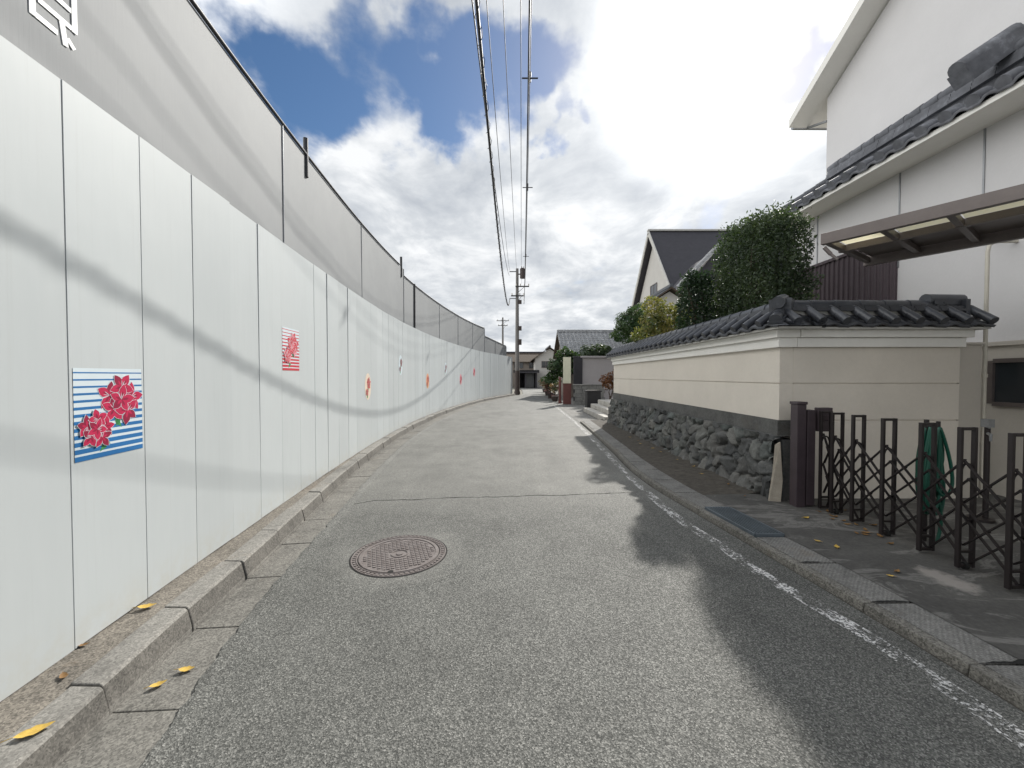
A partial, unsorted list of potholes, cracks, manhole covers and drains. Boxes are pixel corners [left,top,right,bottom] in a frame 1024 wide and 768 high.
drain grate [705,507,785,538]
manhole cover [349,535,447,578]
